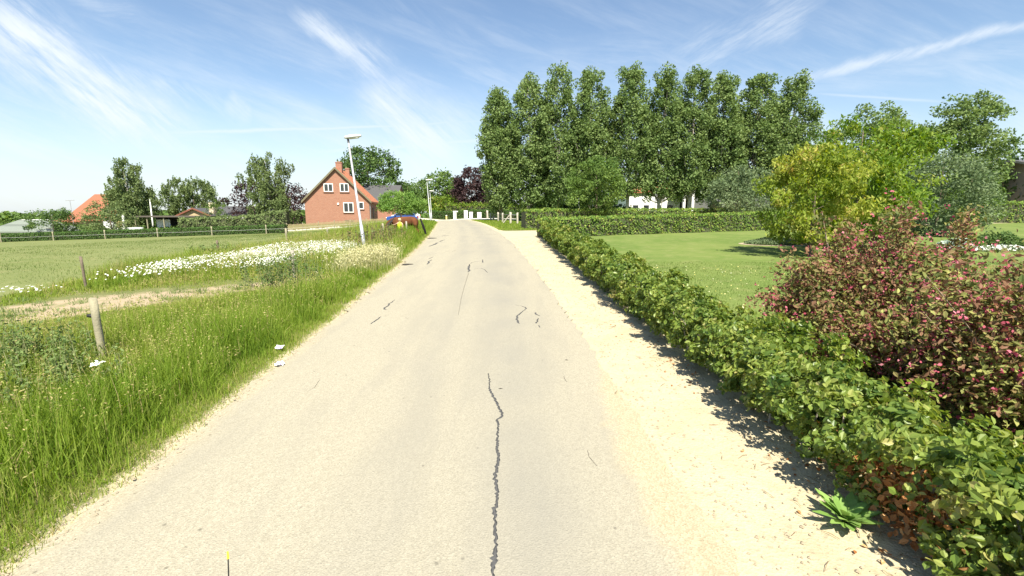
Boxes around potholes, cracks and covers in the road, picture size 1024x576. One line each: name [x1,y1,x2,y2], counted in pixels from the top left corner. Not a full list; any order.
crack [427,240,487,315]
crack [488,373,503,576]
